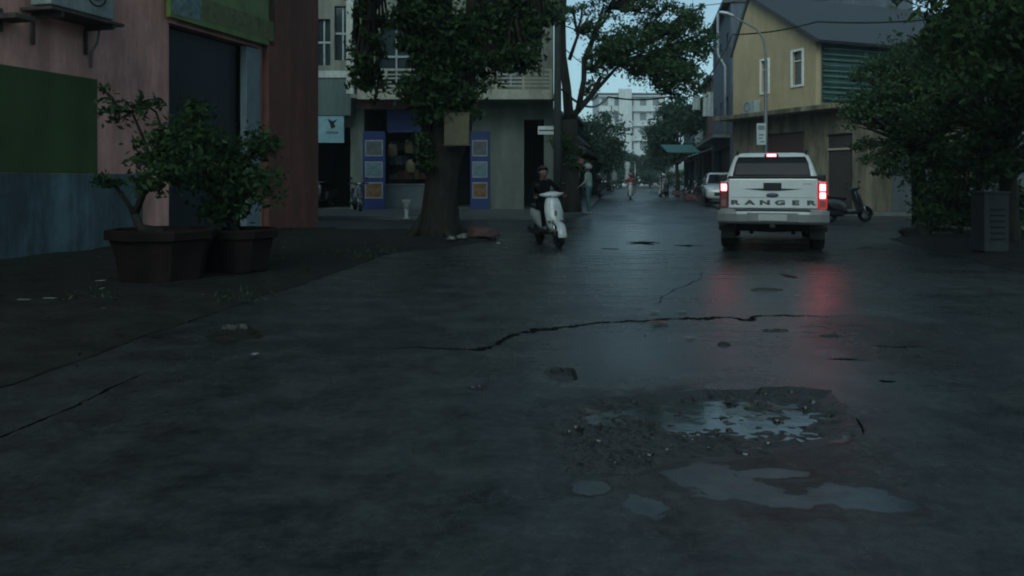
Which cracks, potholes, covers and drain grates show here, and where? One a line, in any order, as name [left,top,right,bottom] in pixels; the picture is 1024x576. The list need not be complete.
pothole [542,367,578,382]
crack [0,370,152,438]
pothole [552,386,849,477]
crack [357,272,852,351]
